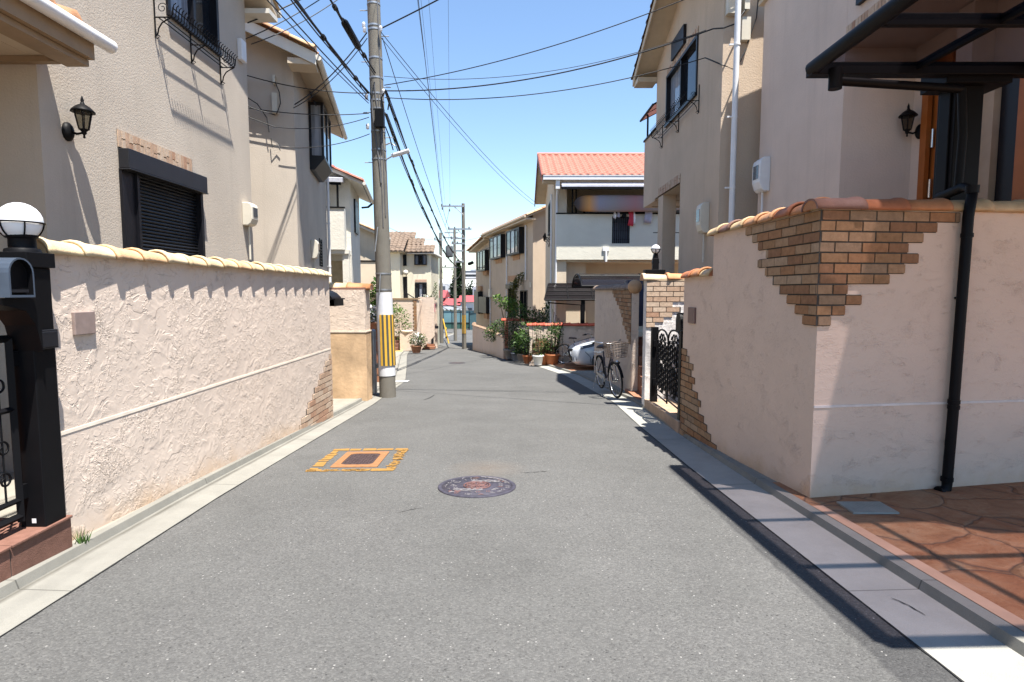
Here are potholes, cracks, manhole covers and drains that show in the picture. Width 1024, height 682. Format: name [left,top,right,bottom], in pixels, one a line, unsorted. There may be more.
manhole cover [438,476,516,498]
utility cover [305,448,409,472]
